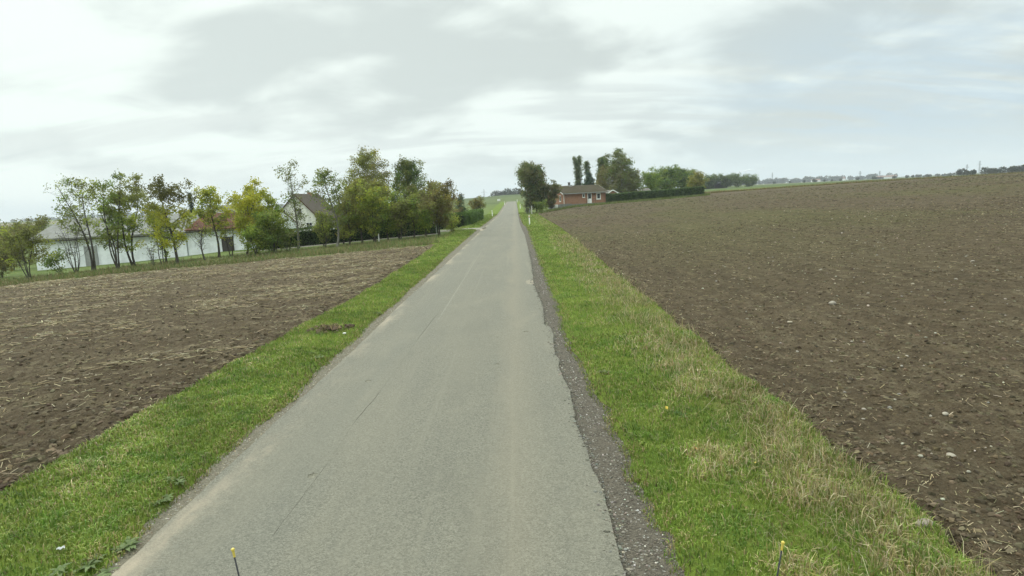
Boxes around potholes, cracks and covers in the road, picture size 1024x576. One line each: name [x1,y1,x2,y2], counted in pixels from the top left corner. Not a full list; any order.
crack [272,274,467,537]
